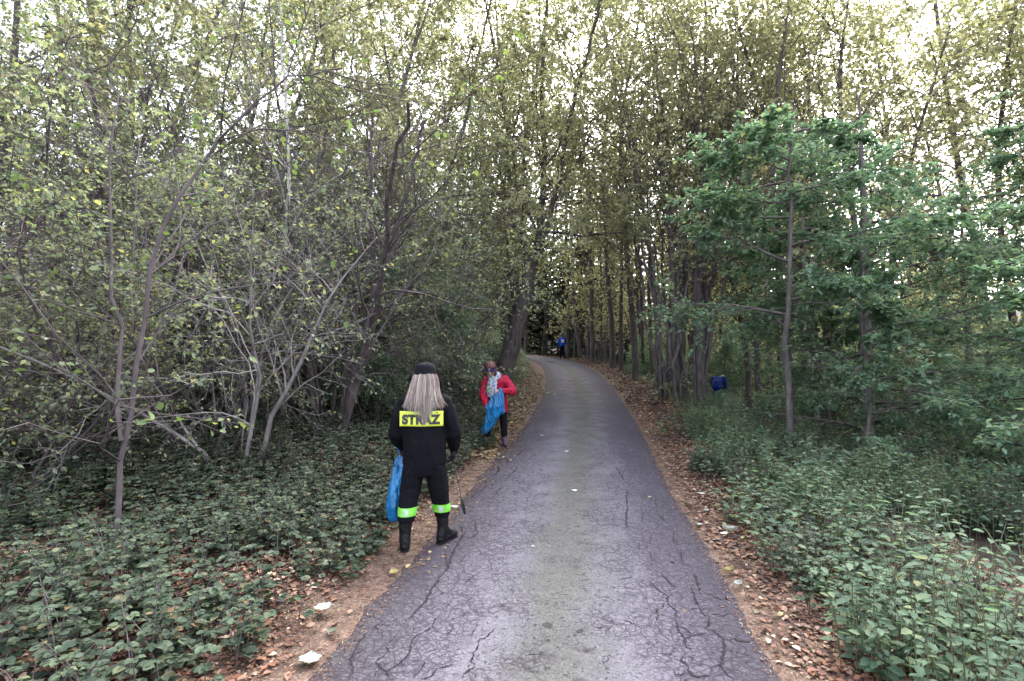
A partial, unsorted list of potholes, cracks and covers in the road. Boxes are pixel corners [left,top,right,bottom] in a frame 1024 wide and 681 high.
crack [575,468,750,681]
crack [347,521,494,680]
